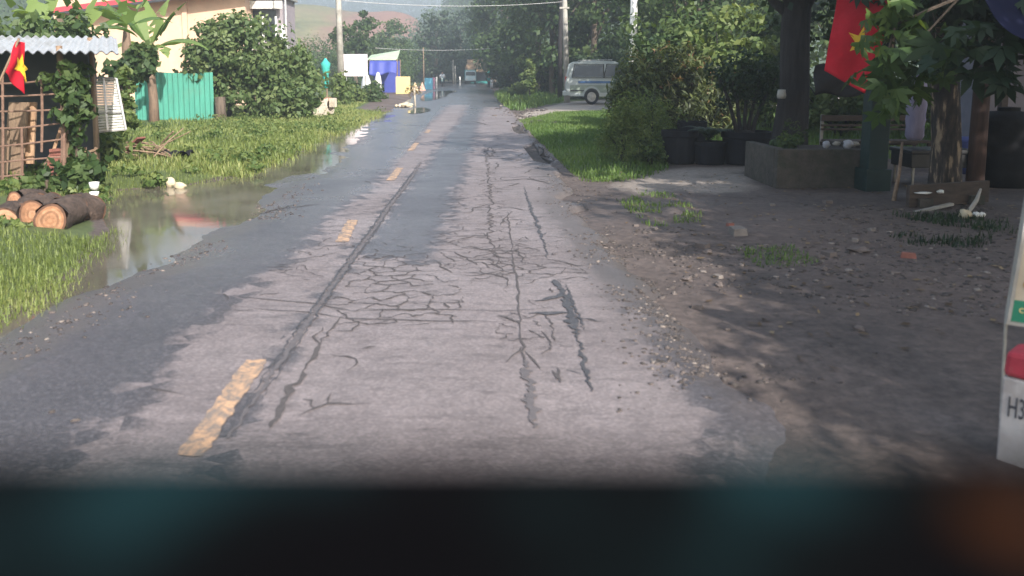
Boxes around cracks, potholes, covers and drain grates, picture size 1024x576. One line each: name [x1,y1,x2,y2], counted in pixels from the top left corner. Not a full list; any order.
pothole [525,143,555,164]
crack [224,121,588,428]
